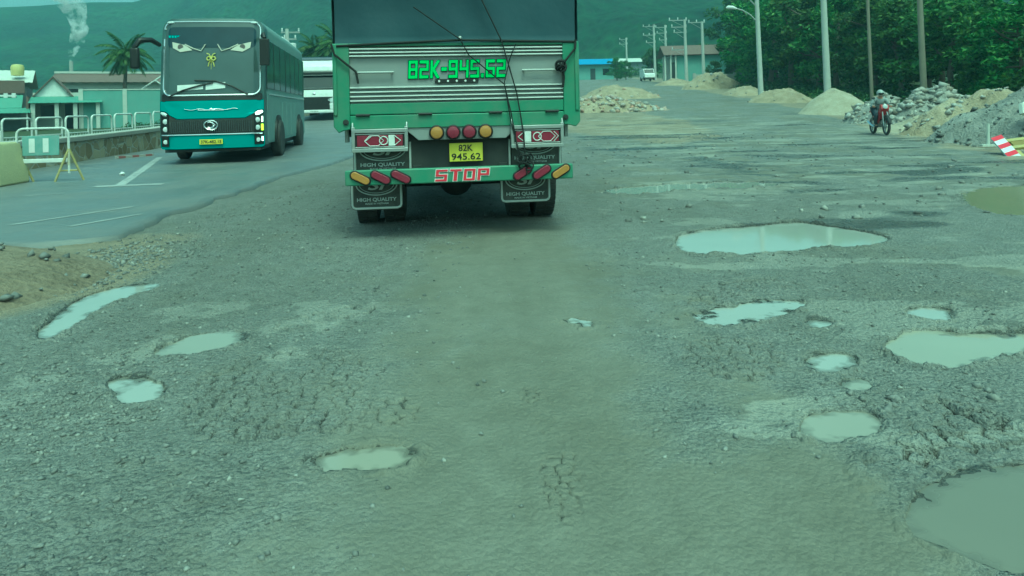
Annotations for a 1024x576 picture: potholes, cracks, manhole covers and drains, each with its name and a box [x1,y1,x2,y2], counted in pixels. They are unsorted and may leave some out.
pothole [783,404,895,448]
pothole [869,323,1024,370]
pothole [100,368,181,410]
pothole [888,455,1024,576]
pothole [291,436,433,480]
pothole [145,327,259,358]
crack [502,378,606,542]
pothole [794,313,842,331]
pothole [896,302,970,324]
pothole [666,218,900,257]
pothole [822,372,892,393]
